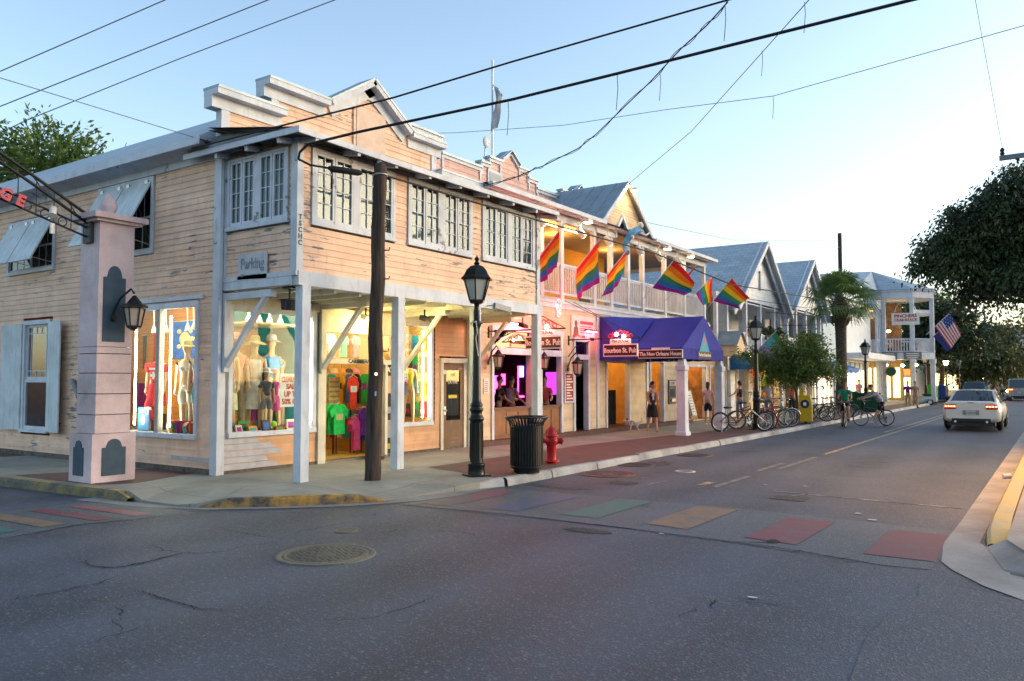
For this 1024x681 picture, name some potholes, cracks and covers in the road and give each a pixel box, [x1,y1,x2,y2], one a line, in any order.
crack [321,595,432,621]
manhole cover [578,470,636,478]
crack [4,523,344,602]
crack [85,590,227,645]
manhole cover [274,544,376,566]
